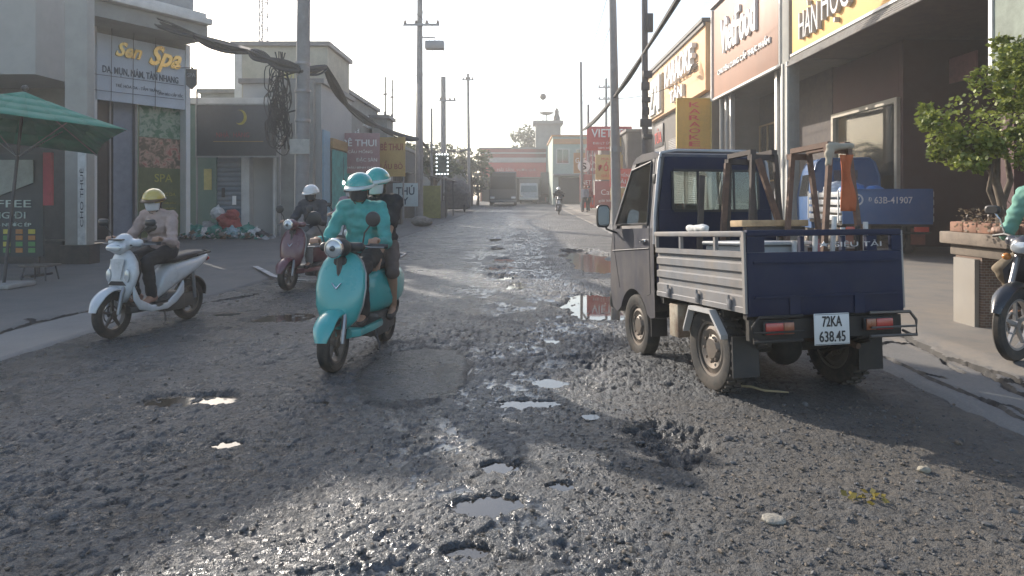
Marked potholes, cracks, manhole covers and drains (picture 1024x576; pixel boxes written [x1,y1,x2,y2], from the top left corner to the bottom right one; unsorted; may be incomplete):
pothole [555,292,626,324]
pothole [558,248,611,274]
pothole [449,494,525,519]
pothole [485,271,521,280]
pothole [141,389,246,408]
pothole [547,479,576,491]
pothole [480,458,524,474]
pothole [494,399,560,410]
pothole [623,418,714,471]
pothole [210,441,243,449]
pothole [250,311,319,323]
pothole [441,544,491,562]
